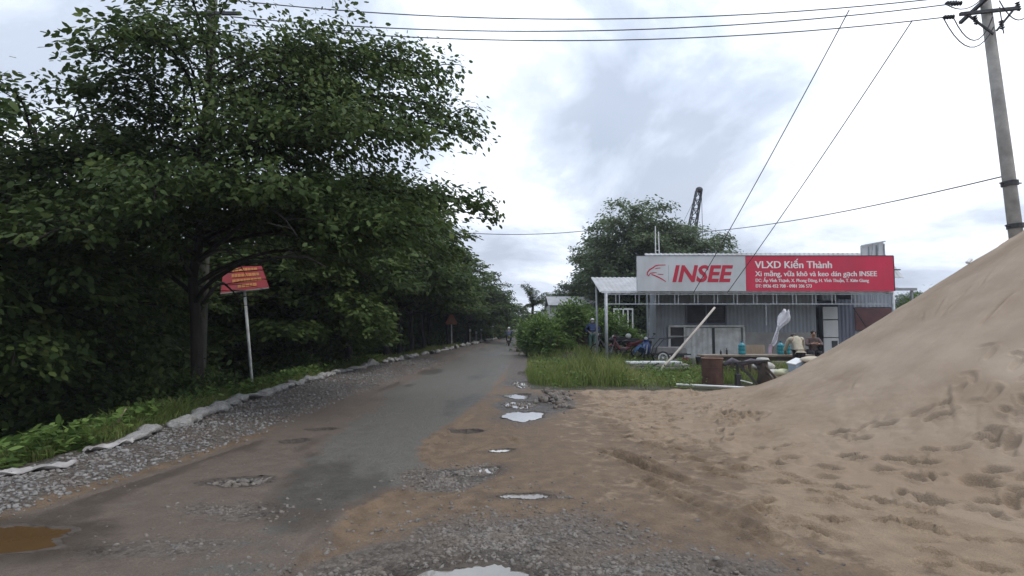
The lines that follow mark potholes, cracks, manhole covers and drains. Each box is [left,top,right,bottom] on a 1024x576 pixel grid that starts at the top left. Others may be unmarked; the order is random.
pothole [0,523,82,555]
pothole [413,560,536,576]
pothole [452,465,502,477]
pothole [501,401,540,410]
pothole [194,475,275,488]
pothole [500,410,547,423]
pothole [496,492,552,500]
